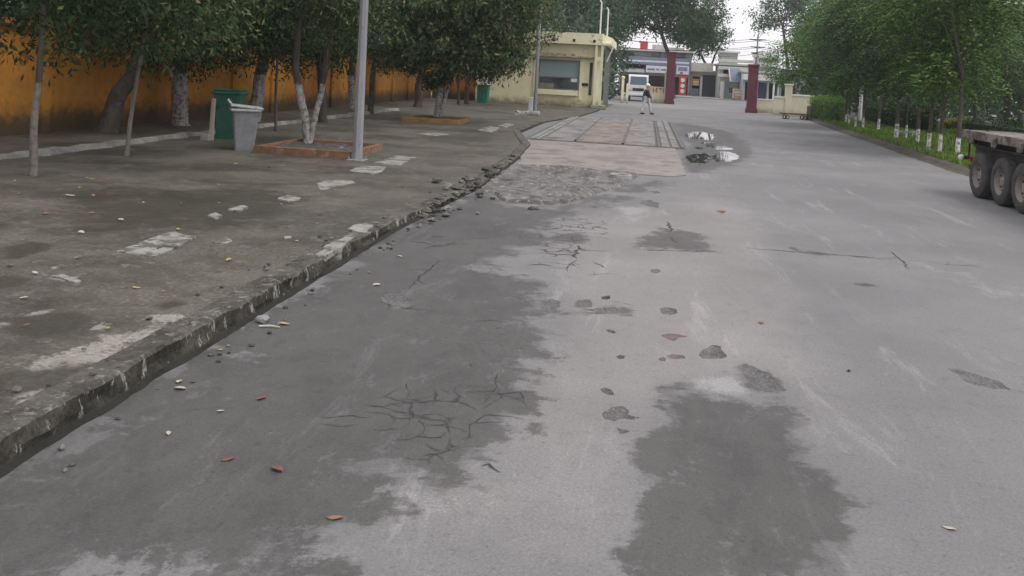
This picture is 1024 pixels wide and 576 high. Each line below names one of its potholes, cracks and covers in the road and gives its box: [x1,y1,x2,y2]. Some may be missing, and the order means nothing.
pothole [684,131,716,140]
pothole [949,369,1010,390]
pothole [602,406,640,421]
pothole [710,151,741,163]
pothole [699,345,727,359]
crack [741,247,908,268]
pothole [701,142,734,150]
crack [409,236,455,288]
pothole [685,154,713,164]
crack [532,218,607,276]
pothole [741,363,787,392]
